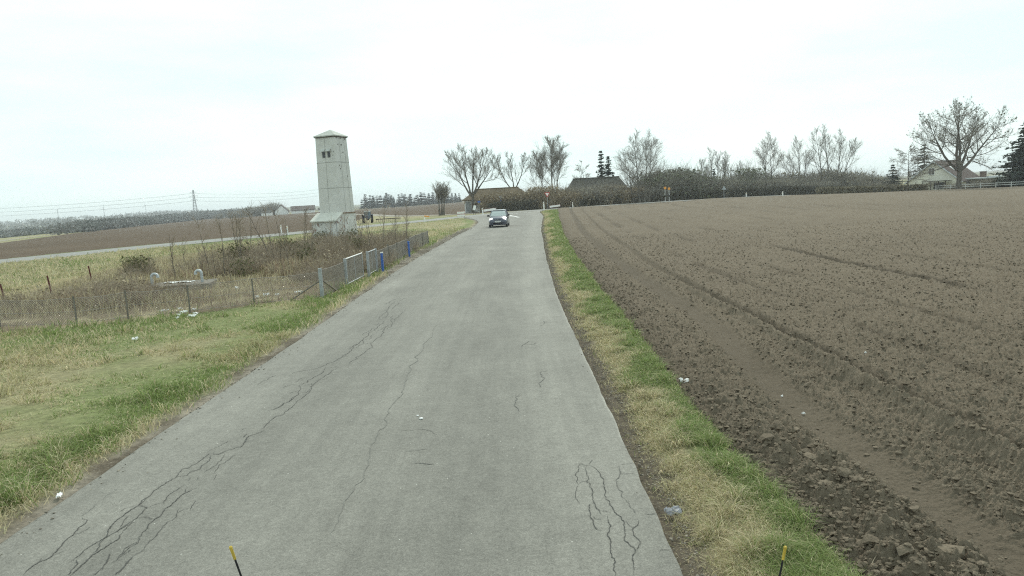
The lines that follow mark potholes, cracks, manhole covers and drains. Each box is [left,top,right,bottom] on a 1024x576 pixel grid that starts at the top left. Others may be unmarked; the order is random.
crack [575,460,653,575]
crack [24,299,403,575]
